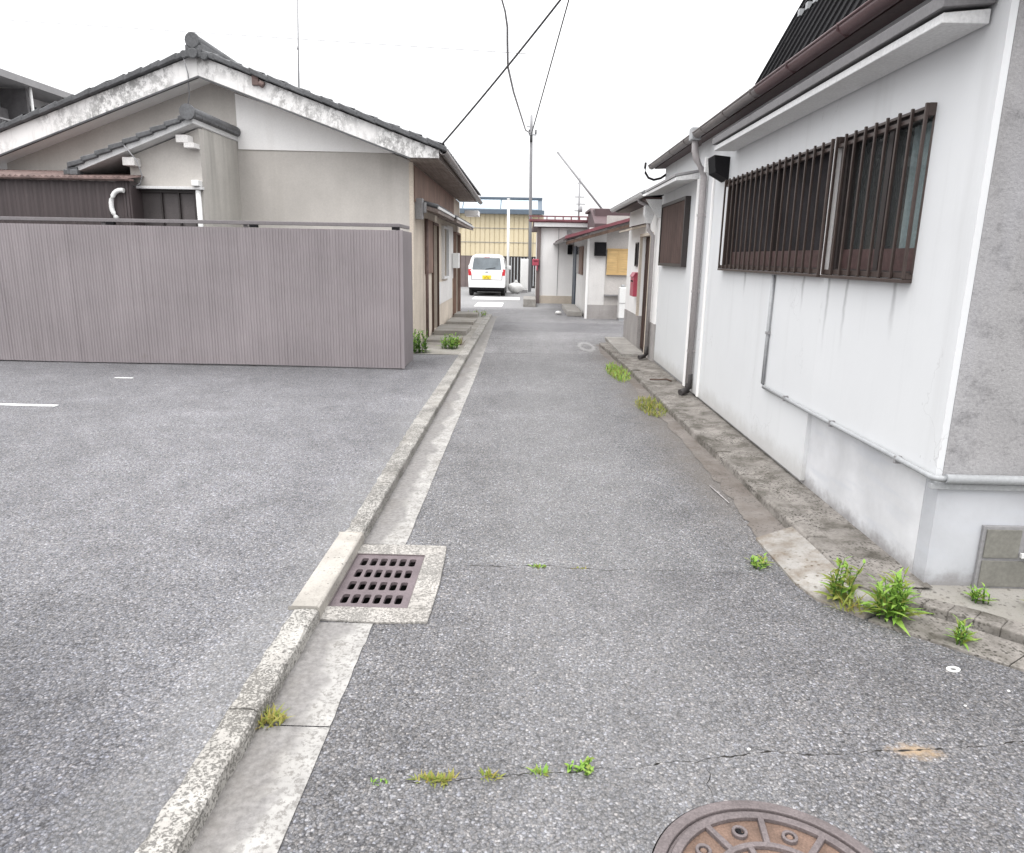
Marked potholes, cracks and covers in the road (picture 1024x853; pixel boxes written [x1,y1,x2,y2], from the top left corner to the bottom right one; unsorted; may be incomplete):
crack [376,741,1024,795]
manhole cover [653,800,873,853]
drain grate [320,544,447,624]
crack [461,565,740,573]
